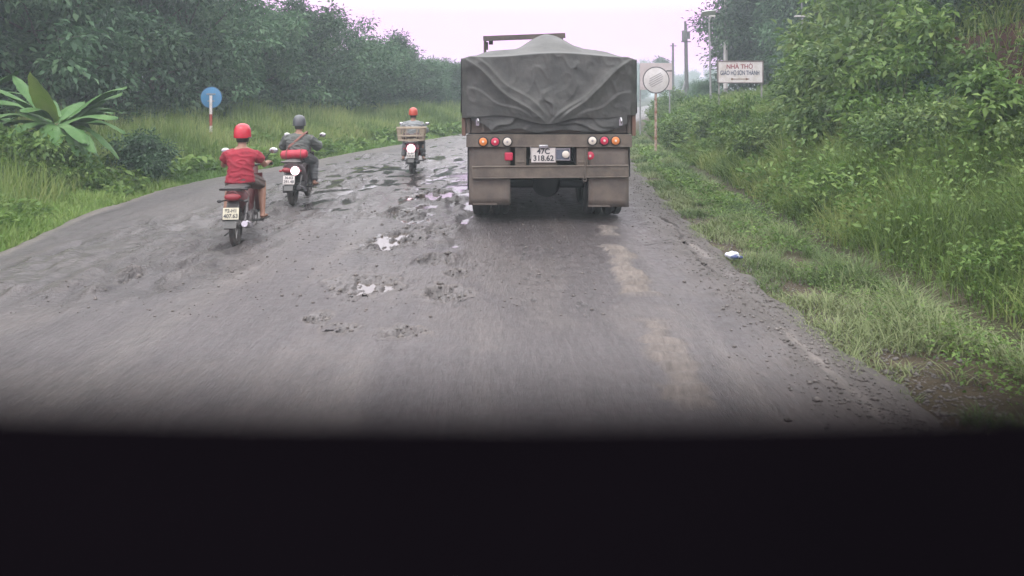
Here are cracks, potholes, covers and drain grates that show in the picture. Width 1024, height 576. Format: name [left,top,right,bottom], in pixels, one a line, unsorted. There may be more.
pothole [363,320,445,342]
pothole [313,271,415,302]
pothole [375,204,436,224]
pothole [288,305,344,332]
pothole [331,221,451,254]
pothole [409,188,467,205]
pothole [305,320,371,341]
pothole [405,280,486,307]
